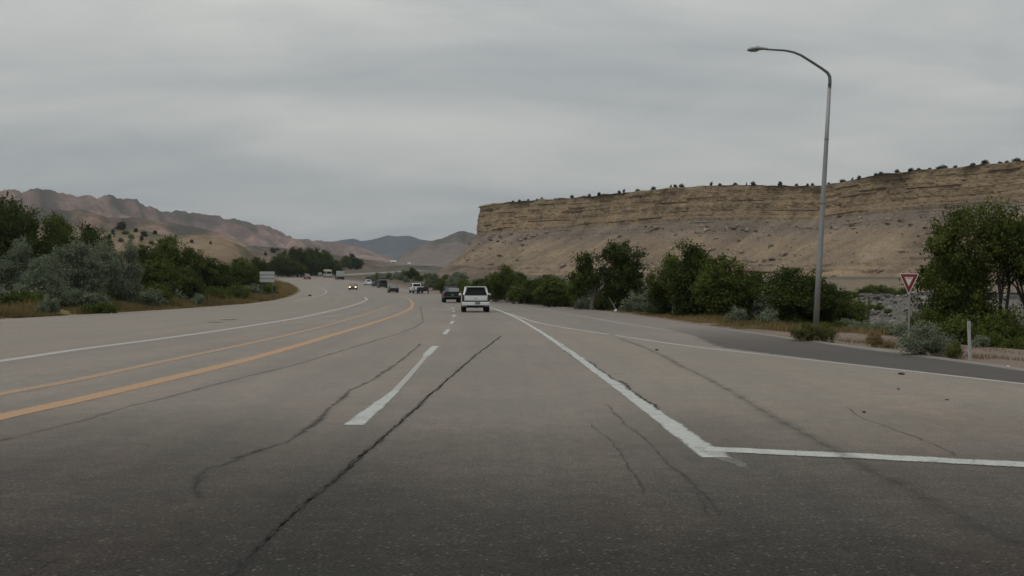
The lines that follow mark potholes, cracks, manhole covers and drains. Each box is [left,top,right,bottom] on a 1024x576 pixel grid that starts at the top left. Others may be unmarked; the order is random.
crack [195,336,501,576]
crack [564,349,721,514]
